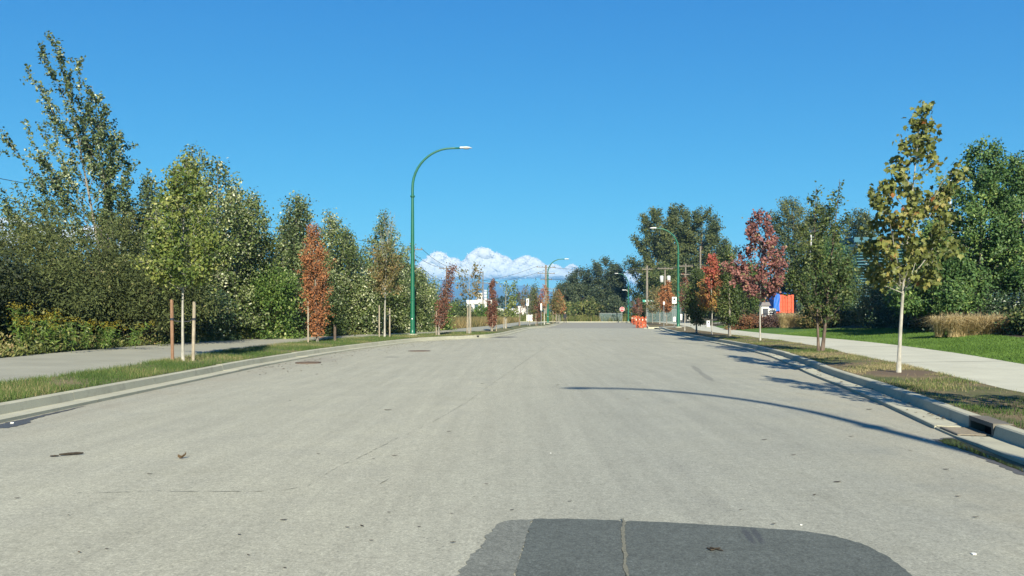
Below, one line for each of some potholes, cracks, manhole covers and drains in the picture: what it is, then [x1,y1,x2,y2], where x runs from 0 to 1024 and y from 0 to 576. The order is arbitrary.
drain grate [935,415,1013,438]
